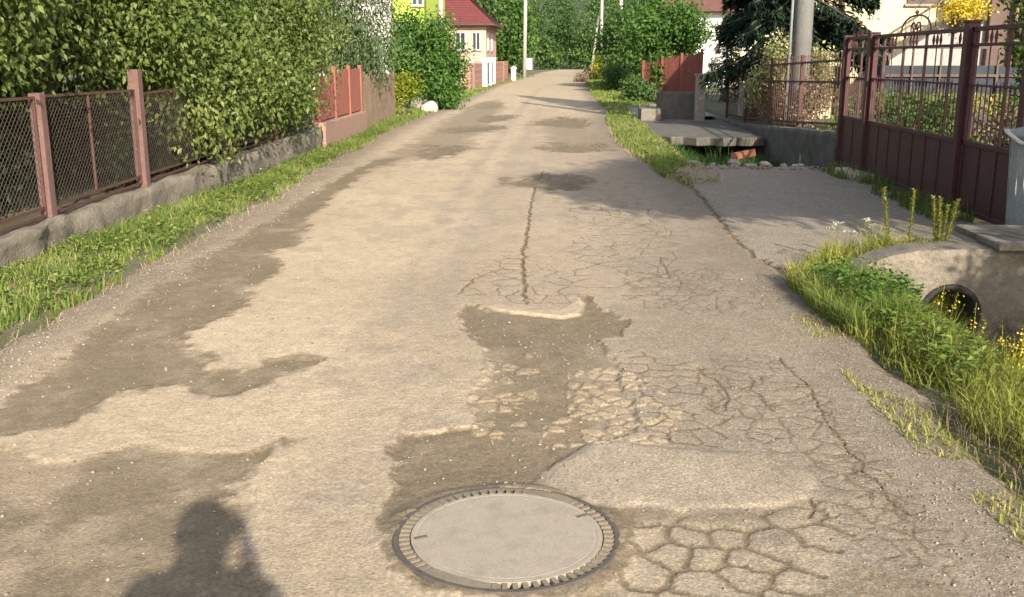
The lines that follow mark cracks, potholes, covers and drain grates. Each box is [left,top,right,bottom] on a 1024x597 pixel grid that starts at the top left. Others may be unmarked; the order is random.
crack [587,350,958,597]
manhole cover [392,487,620,595]
crack [458,171,786,313]
pothole [376,295,643,597]
